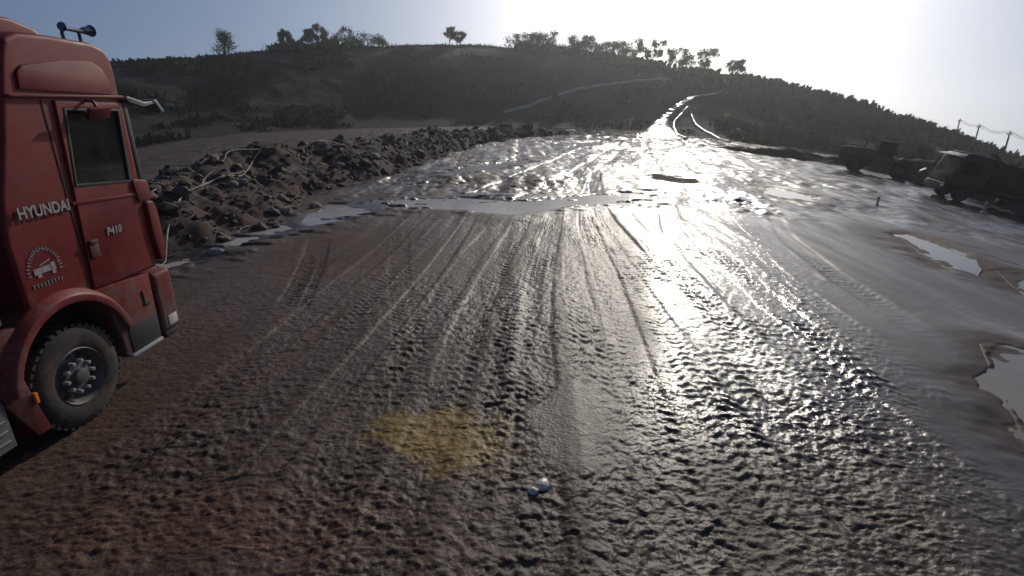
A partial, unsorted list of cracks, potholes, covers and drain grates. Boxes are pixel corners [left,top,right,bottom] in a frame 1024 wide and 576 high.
pothole [893,232,982,276]
pothole [640,172,708,184]
pothole [975,343,1024,441]
